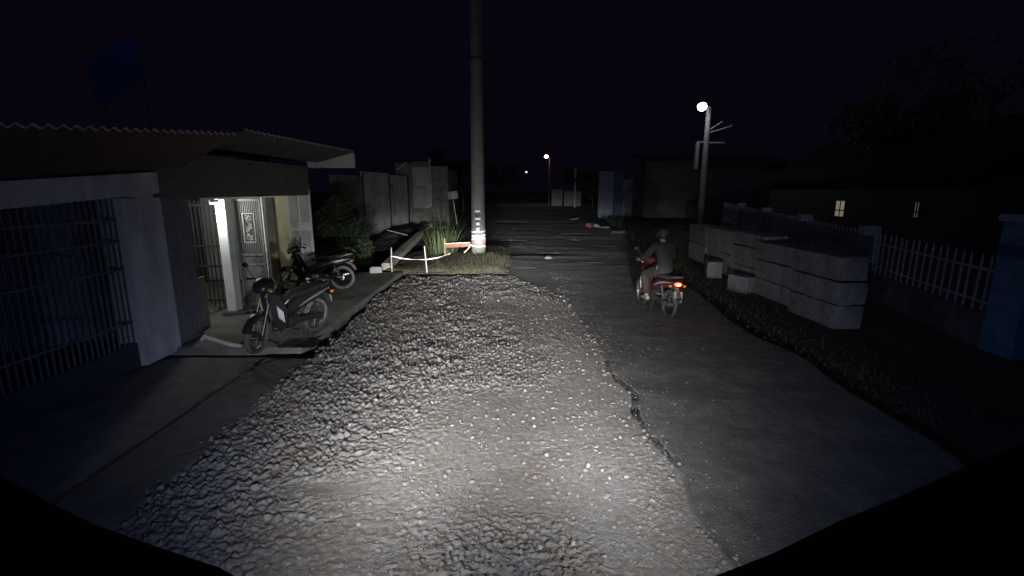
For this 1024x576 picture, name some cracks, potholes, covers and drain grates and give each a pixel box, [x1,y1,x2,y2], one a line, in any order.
crack [483,285,735,563]
